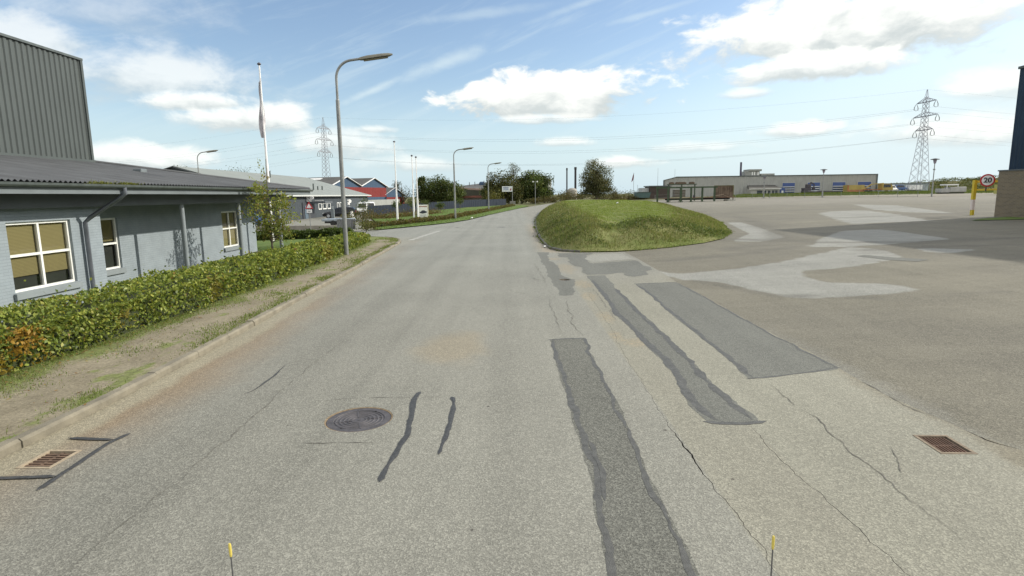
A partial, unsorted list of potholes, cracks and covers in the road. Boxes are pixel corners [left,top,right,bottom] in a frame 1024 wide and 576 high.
crack [767,382,973,547]
manhole cover [324,407,393,432]
drain grate [15,450,82,469]
drain grate [913,435,978,454]
